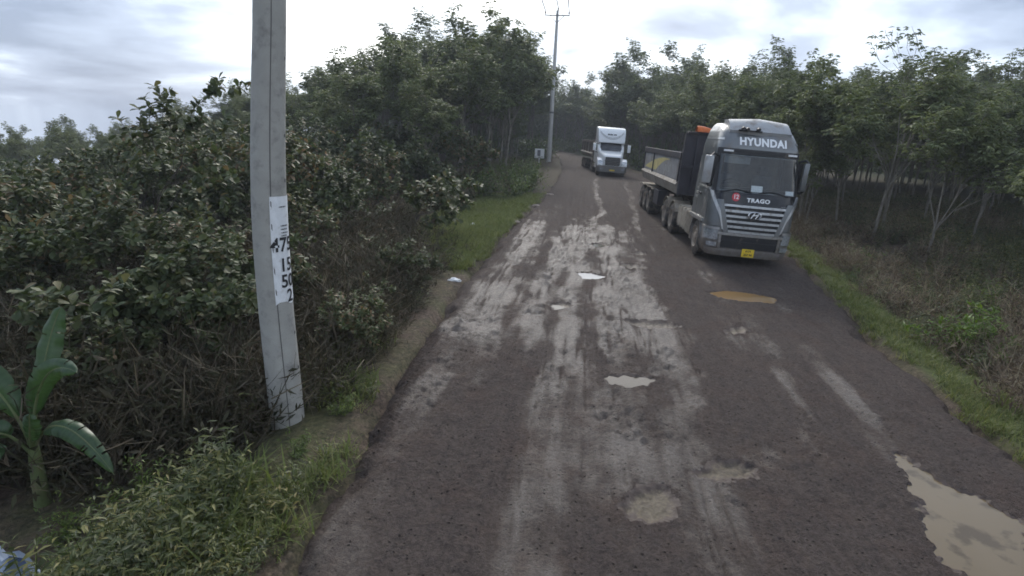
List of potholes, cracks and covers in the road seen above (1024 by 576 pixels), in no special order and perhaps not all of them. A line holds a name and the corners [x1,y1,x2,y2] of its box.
pothole [617,482,681,524]
pothole [575,271,605,279]
pothole [705,290,778,304]
pothole [604,373,656,388]
pothole [889,450,1024,576]
pothole [723,326,751,335]
pothole [688,459,761,483]
pothole [547,300,577,310]
